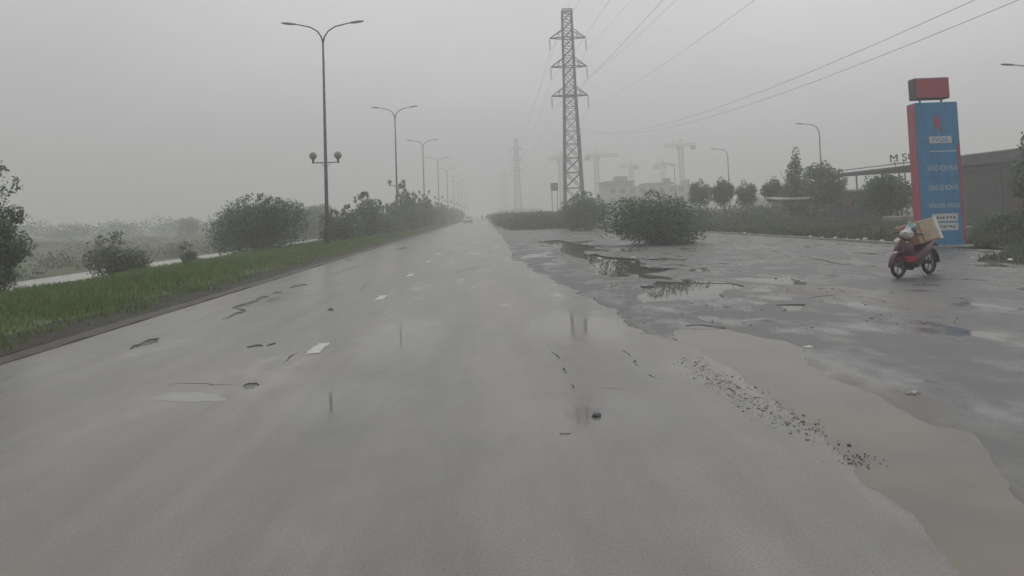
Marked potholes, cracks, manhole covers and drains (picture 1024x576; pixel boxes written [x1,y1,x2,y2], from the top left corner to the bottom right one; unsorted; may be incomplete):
pothole [129,338,160,350]
pothole [589,253,677,275]
pothole [544,240,595,260]
